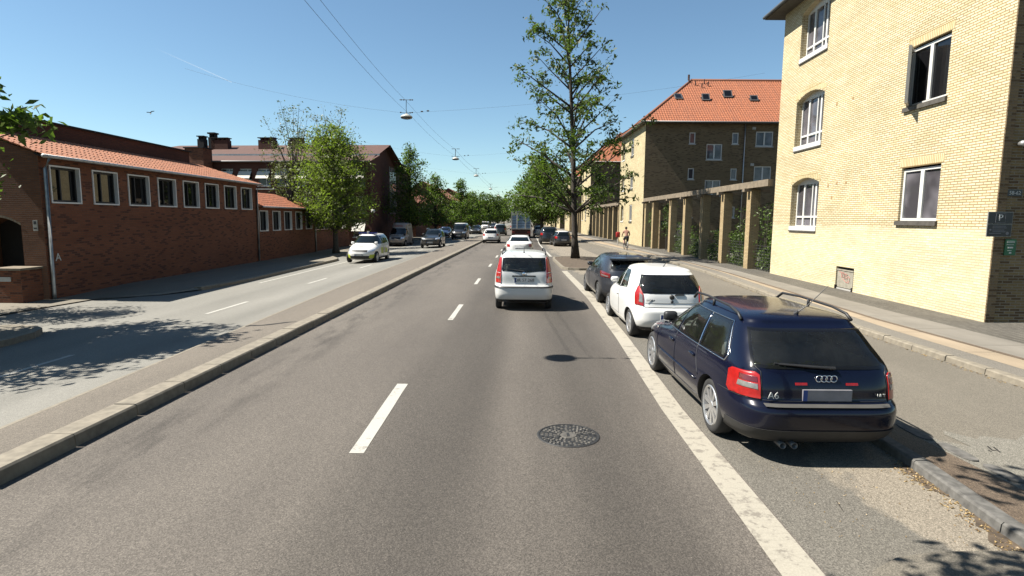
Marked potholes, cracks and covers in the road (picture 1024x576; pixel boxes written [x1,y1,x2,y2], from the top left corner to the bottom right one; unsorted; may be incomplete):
manhole cover [537,424,600,448]
